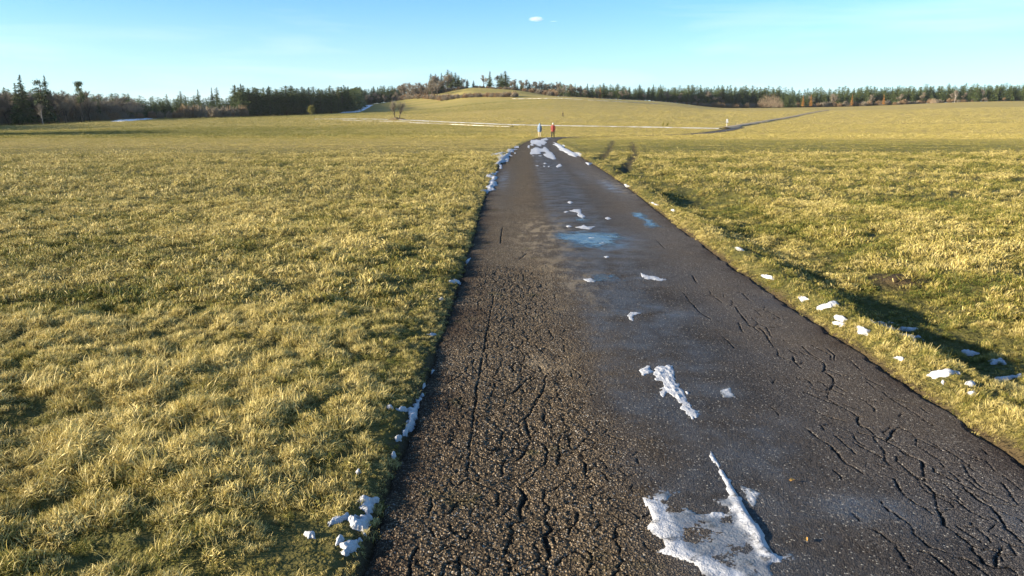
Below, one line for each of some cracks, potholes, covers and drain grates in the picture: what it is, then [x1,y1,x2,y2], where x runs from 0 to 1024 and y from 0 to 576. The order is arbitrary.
crack [687,278,1024,576]
crack [416,229,655,576]
